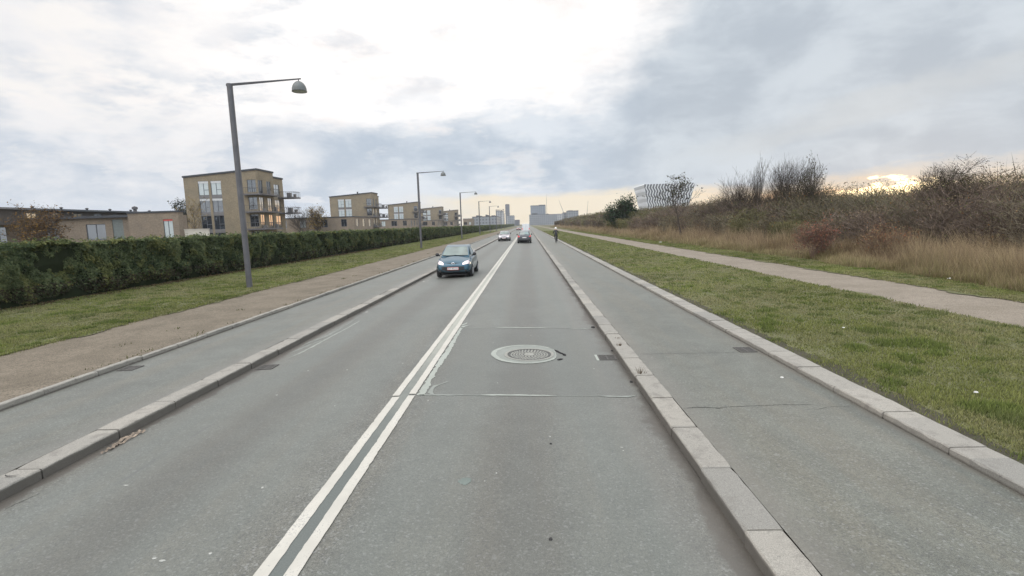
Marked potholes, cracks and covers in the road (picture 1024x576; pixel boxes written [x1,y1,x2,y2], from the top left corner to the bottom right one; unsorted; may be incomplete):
manhole cover [491,345,557,364]
